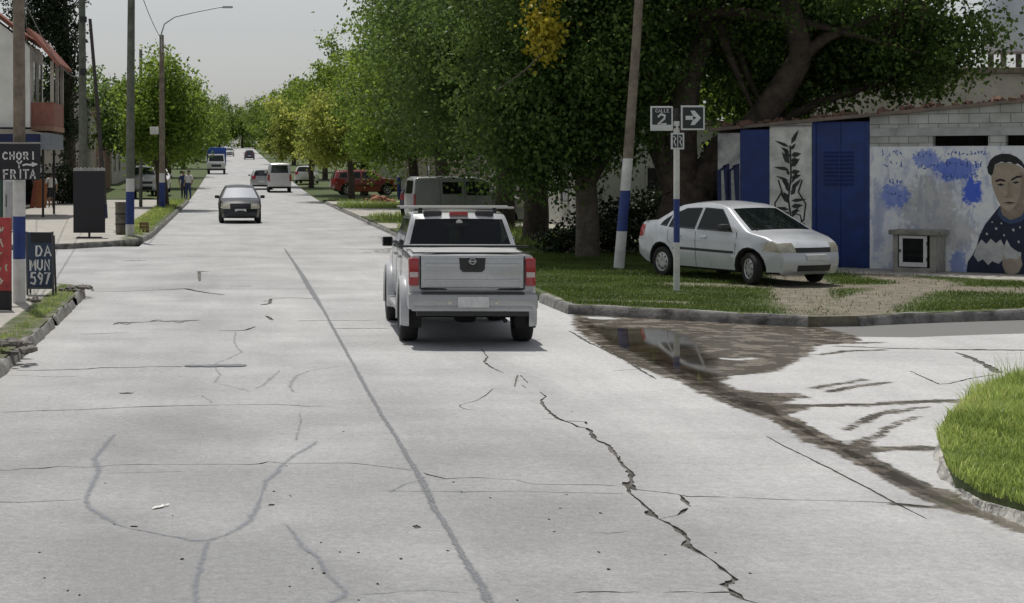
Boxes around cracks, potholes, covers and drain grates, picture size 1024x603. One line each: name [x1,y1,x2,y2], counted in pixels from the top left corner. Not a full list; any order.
crack [100,320,197,334]
crack [570,331,656,379]
crack [98,271,224,295]
crack [418,349,756,603]
crack [910,352,1004,384]
crack [236,299,273,331]
